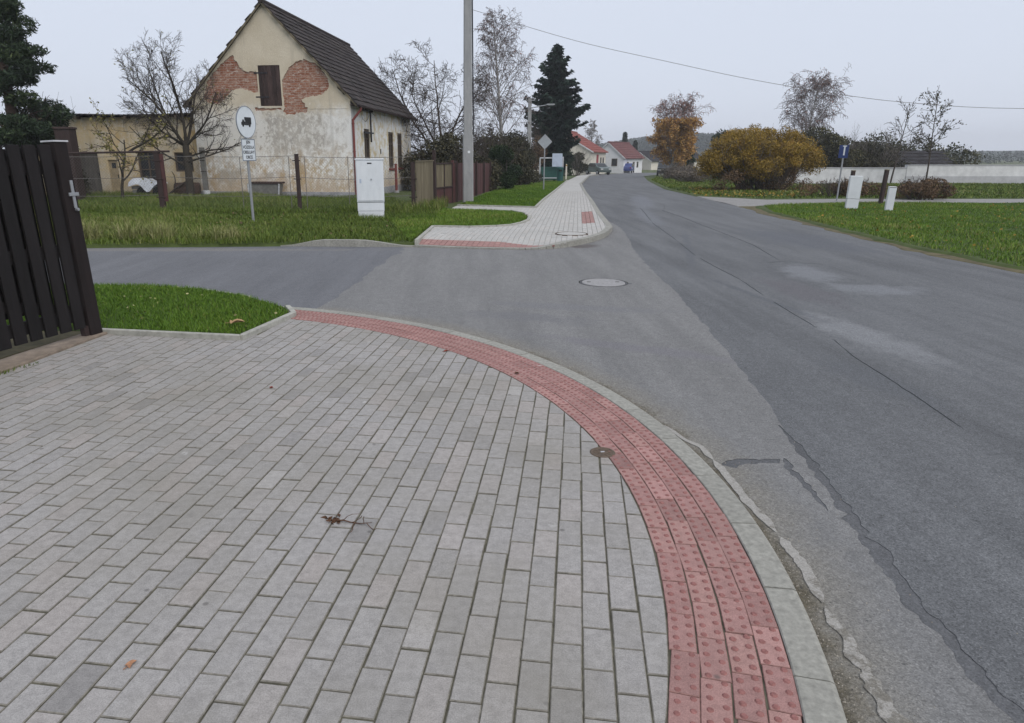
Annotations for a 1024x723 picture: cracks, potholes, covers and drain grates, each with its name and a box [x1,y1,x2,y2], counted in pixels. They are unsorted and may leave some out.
utility cover [590,447,615,458]
crack [640,207,962,428]
manhole cover [580,278,632,287]
